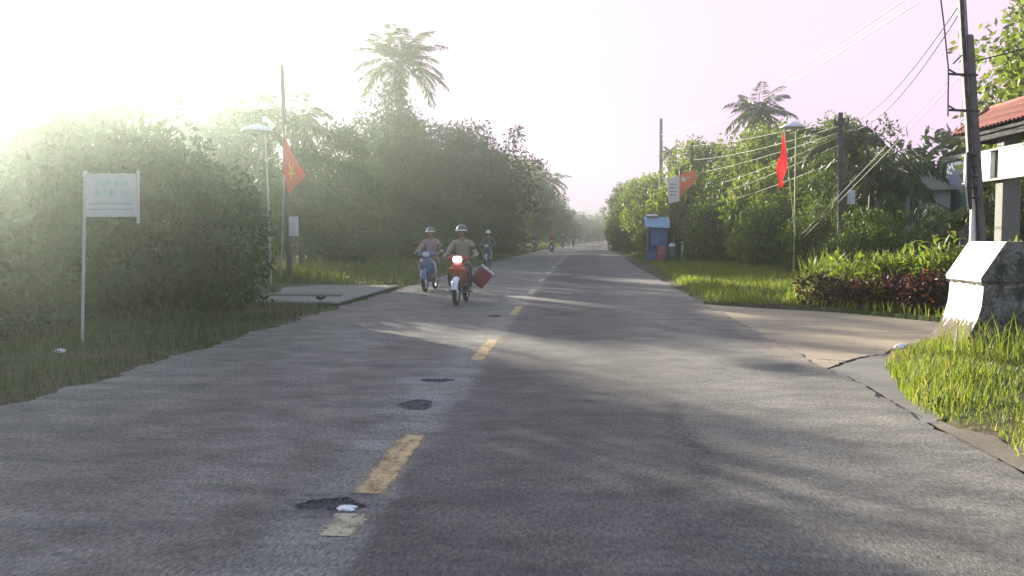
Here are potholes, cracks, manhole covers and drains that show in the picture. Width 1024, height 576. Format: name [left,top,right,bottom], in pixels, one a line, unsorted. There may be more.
pothole [294,497,367,511]
pothole [397,399,432,411]
crack [818,354,923,418]
